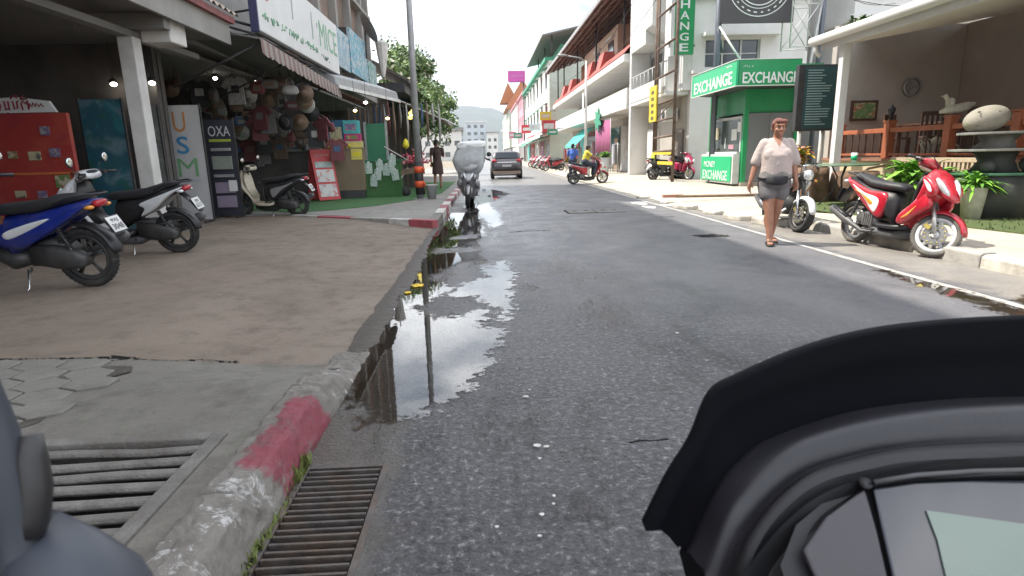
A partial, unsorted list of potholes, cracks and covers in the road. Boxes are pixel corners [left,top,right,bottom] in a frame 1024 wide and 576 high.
drain grate [243,462,389,576]
crack [622,434,677,448]
drain grate [45,432,228,546]
